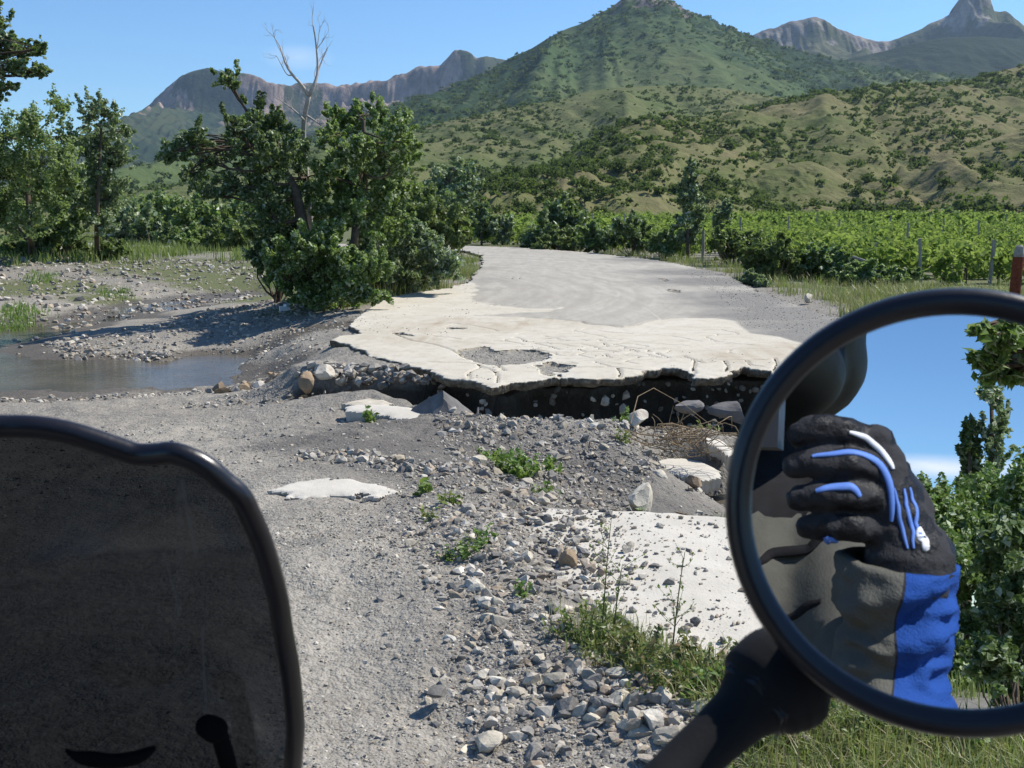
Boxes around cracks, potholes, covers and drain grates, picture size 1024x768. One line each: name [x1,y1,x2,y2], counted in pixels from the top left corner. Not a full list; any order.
pothole [535,362,575,376]
pothole [453,347,551,367]
crack [523,334,778,377]
